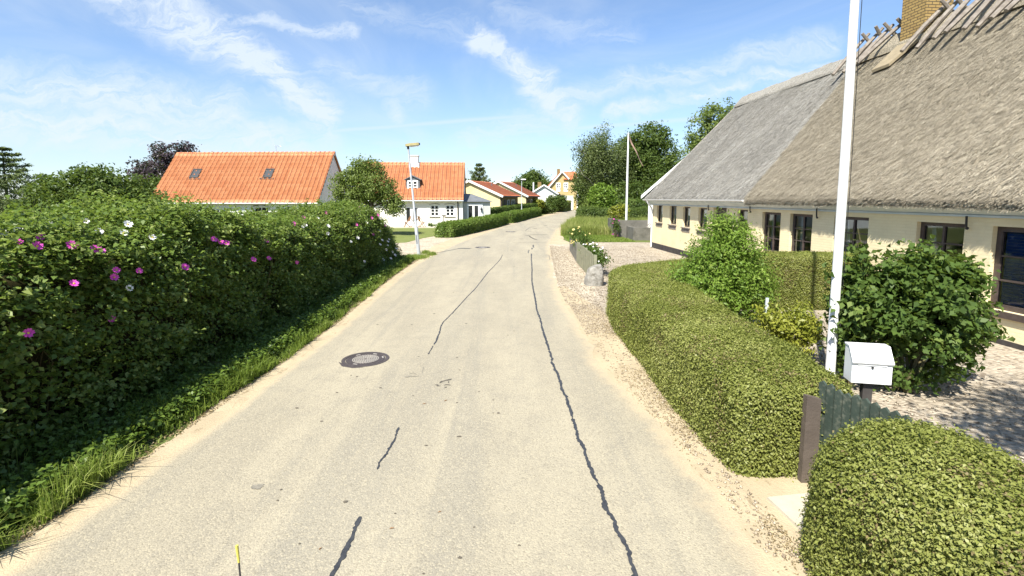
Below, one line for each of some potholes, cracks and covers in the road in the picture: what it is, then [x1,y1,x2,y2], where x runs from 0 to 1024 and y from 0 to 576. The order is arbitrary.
manhole cover [339,352,389,368]
